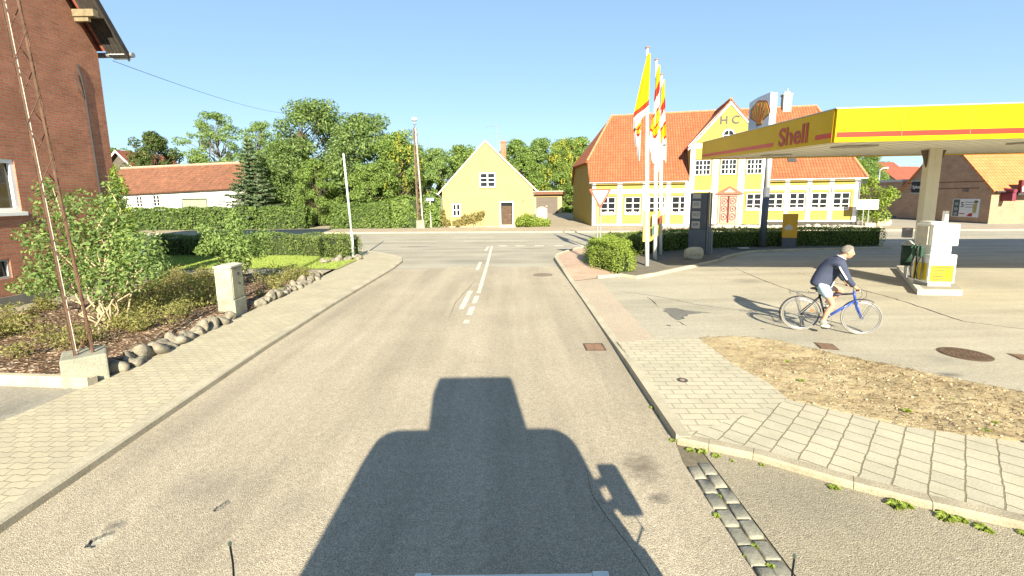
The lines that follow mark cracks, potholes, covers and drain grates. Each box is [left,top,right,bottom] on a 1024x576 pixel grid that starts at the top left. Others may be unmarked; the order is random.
manhole cover [814,342,839,350]
manhole cover [936,347,995,362]
